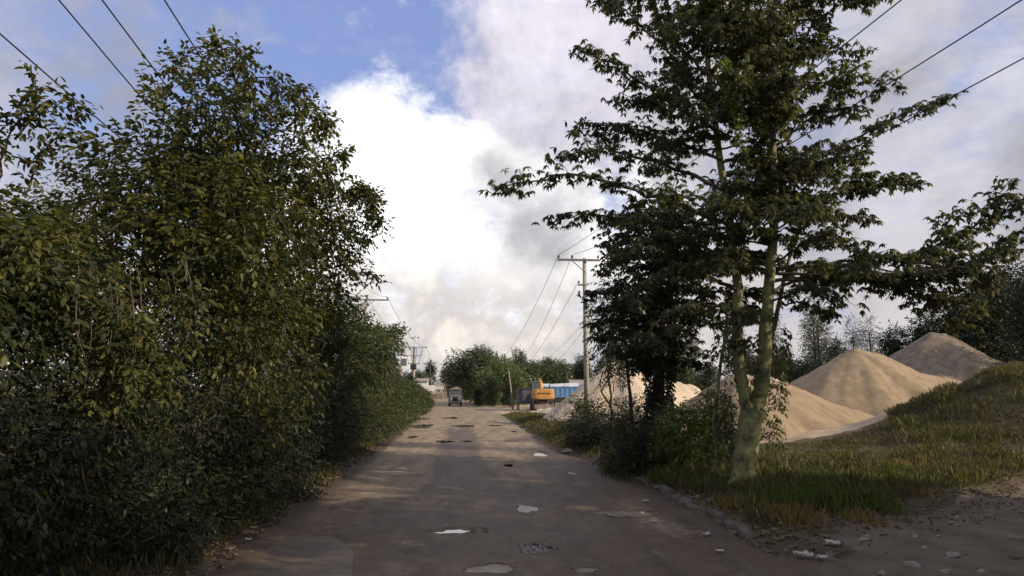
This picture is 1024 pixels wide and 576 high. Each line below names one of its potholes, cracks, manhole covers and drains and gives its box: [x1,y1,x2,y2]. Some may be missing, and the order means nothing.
pothole [513,504,540,513]
pothole [462,563,517,574]
pothole [517,543,559,554]
